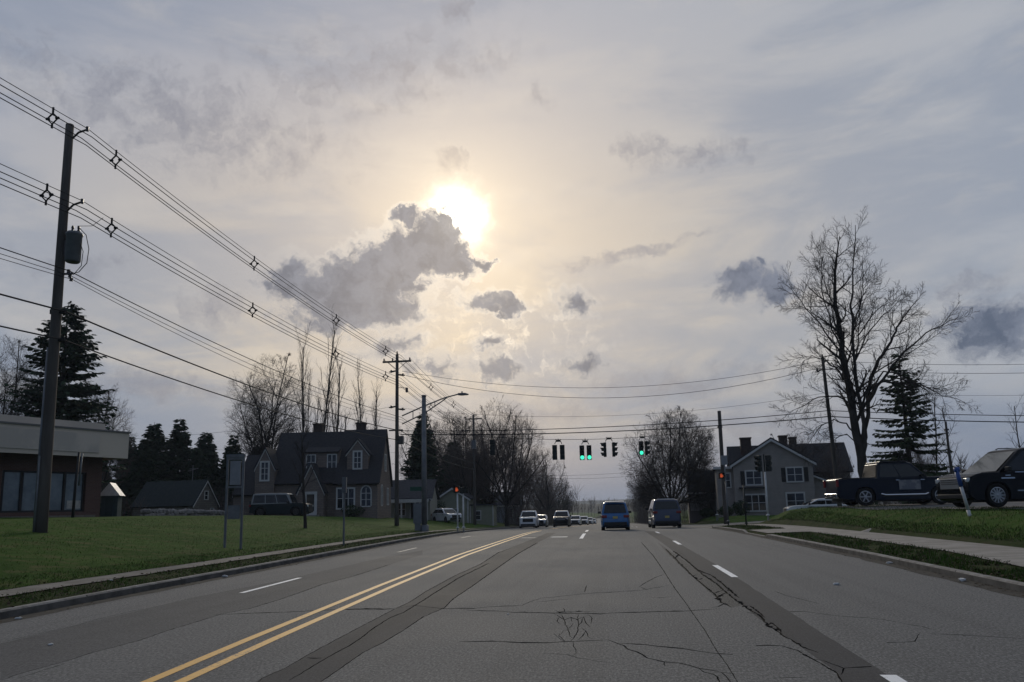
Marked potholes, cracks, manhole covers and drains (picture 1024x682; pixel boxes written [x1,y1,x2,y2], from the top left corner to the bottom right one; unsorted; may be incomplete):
crack [6,543,1021,682]
